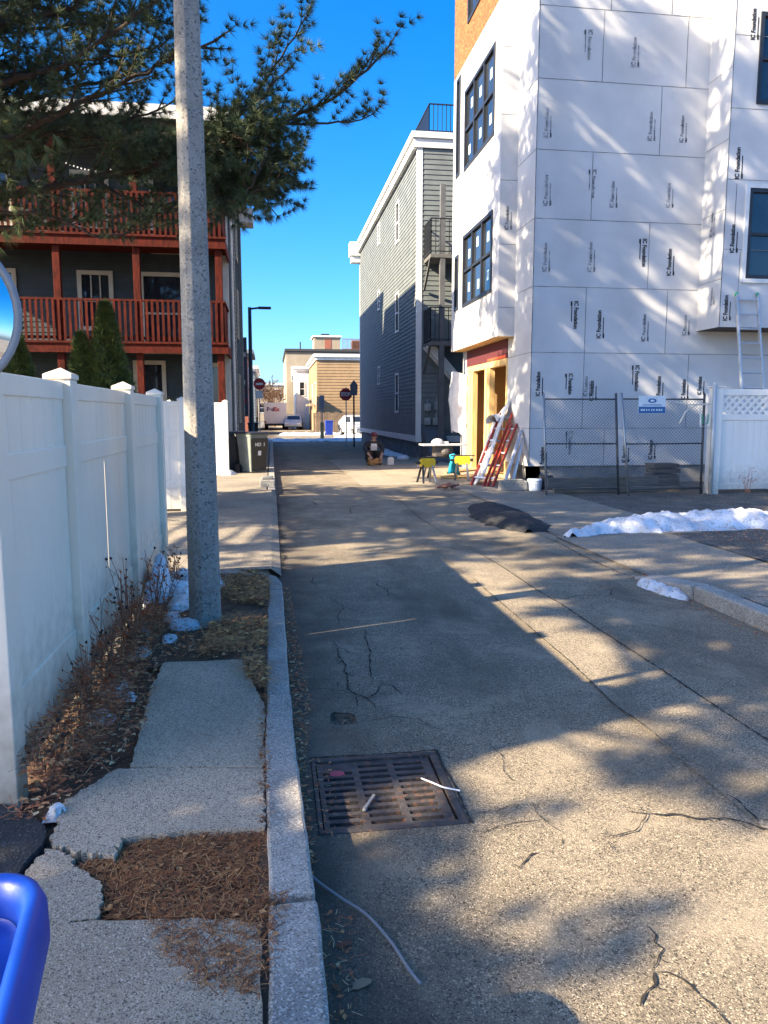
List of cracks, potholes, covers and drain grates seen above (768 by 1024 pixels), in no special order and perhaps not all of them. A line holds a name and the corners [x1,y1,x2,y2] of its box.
crack [602,793,768,856]
crack [310,578,452,732]
drain grate [310,749,474,836]
crack [640,926,730,1024]
crack [471,745,563,847]
